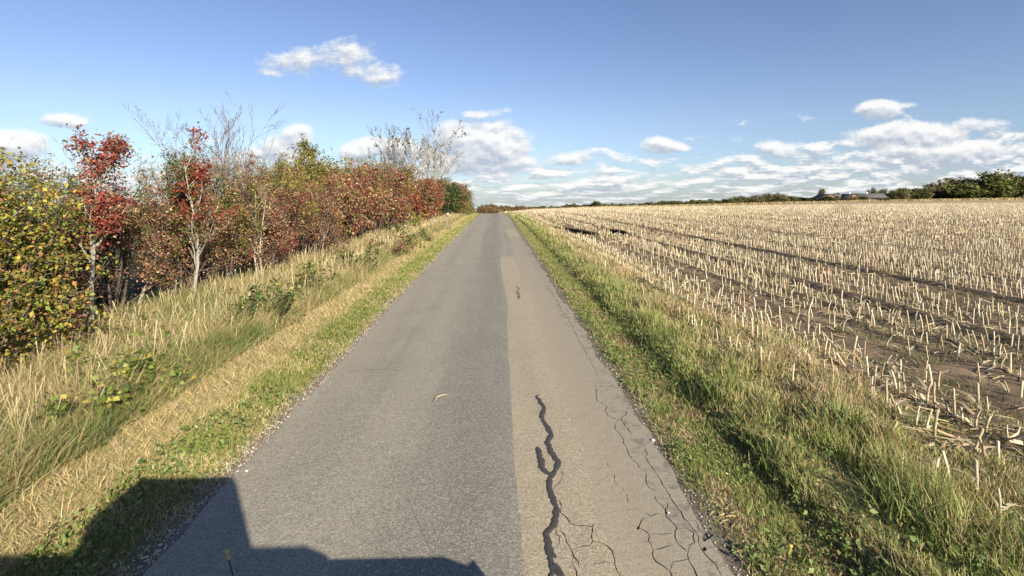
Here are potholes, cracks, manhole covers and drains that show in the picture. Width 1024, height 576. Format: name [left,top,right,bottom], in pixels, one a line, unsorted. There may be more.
crack [595,384,722,576]
crack [553,468,620,576]
